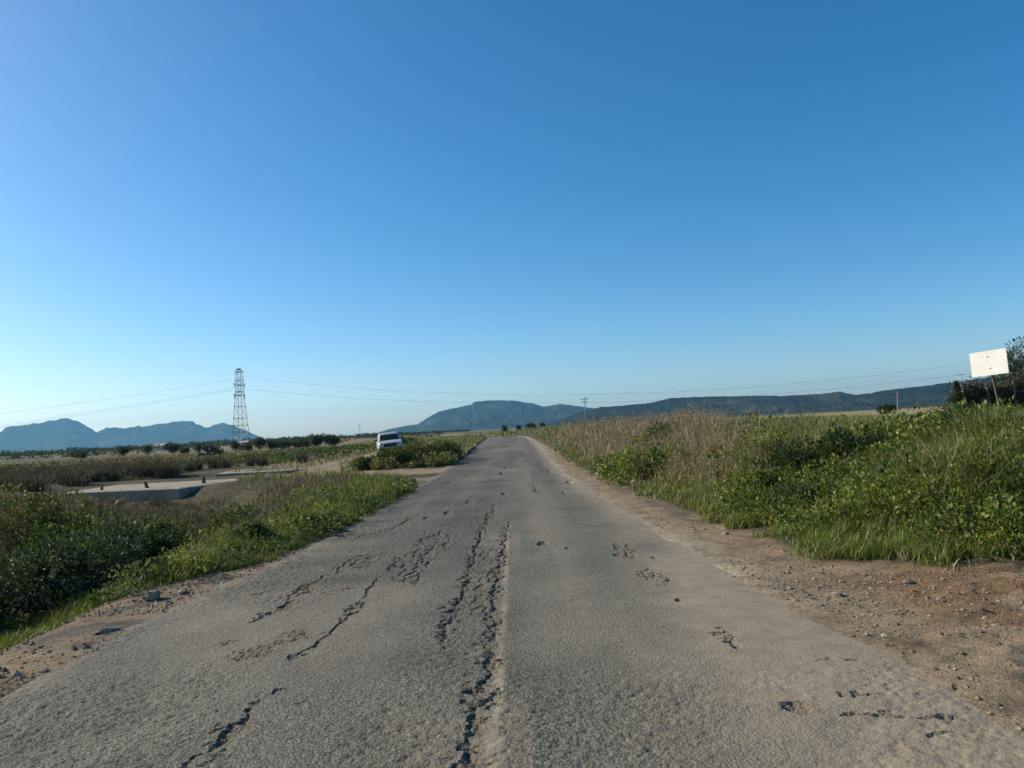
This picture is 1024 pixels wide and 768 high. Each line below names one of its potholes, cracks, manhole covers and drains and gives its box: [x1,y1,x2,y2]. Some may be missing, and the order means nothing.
crack [180,688,310,768]
crack [215,503,498,662]
